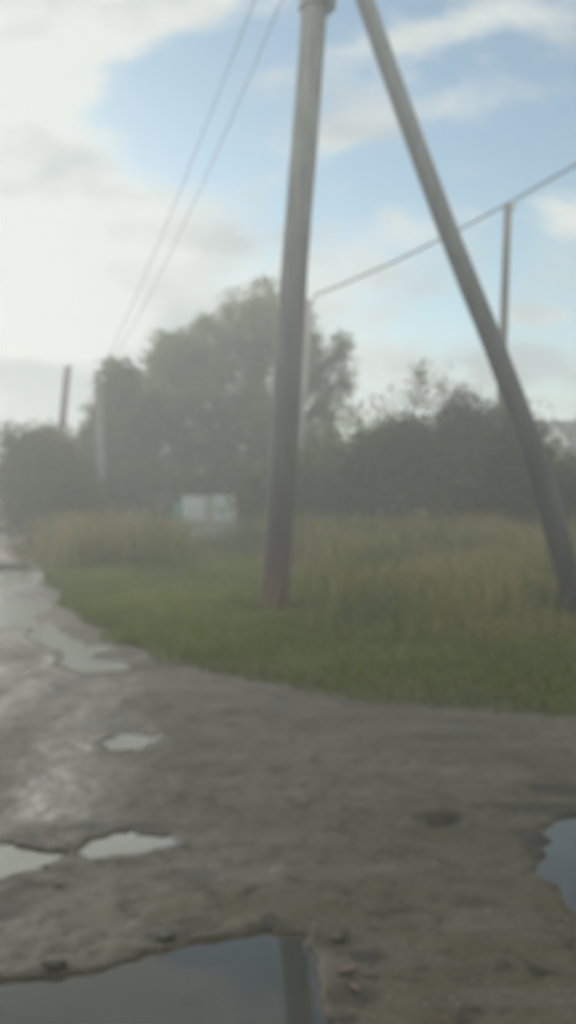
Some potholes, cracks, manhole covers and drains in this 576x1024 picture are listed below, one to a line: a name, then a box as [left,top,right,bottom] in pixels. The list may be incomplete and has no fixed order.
pothole [533,812,576,912]
pothole [100,733,161,750]
pothole [75,829,182,860]
pothole [0,839,72,879]
pothole [0,927,335,1024]
pothole [415,808,470,830]
pothole [26,621,133,674]
